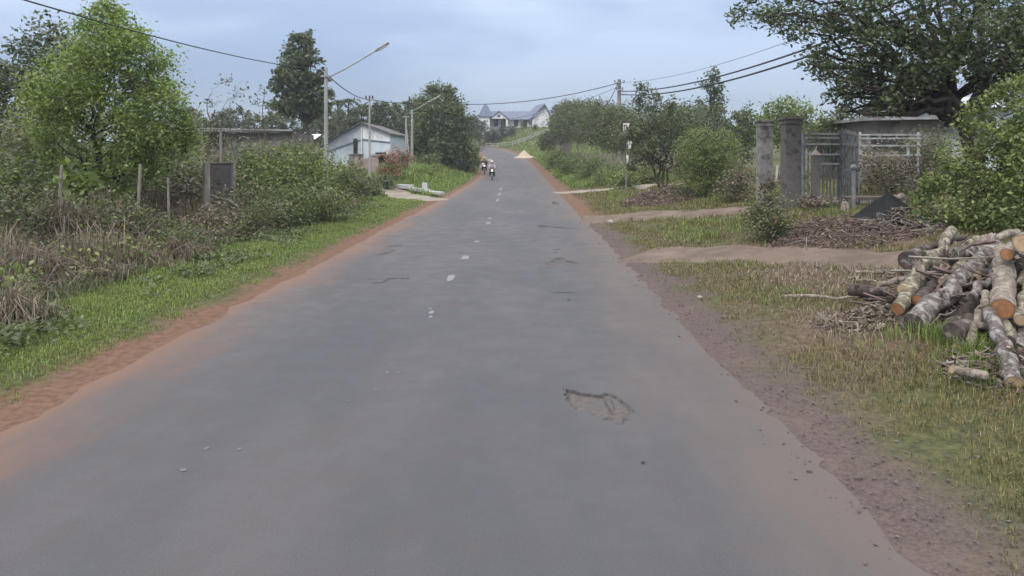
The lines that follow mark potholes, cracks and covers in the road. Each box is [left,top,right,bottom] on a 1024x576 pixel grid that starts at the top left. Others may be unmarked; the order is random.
pothole [560,388,634,426]
